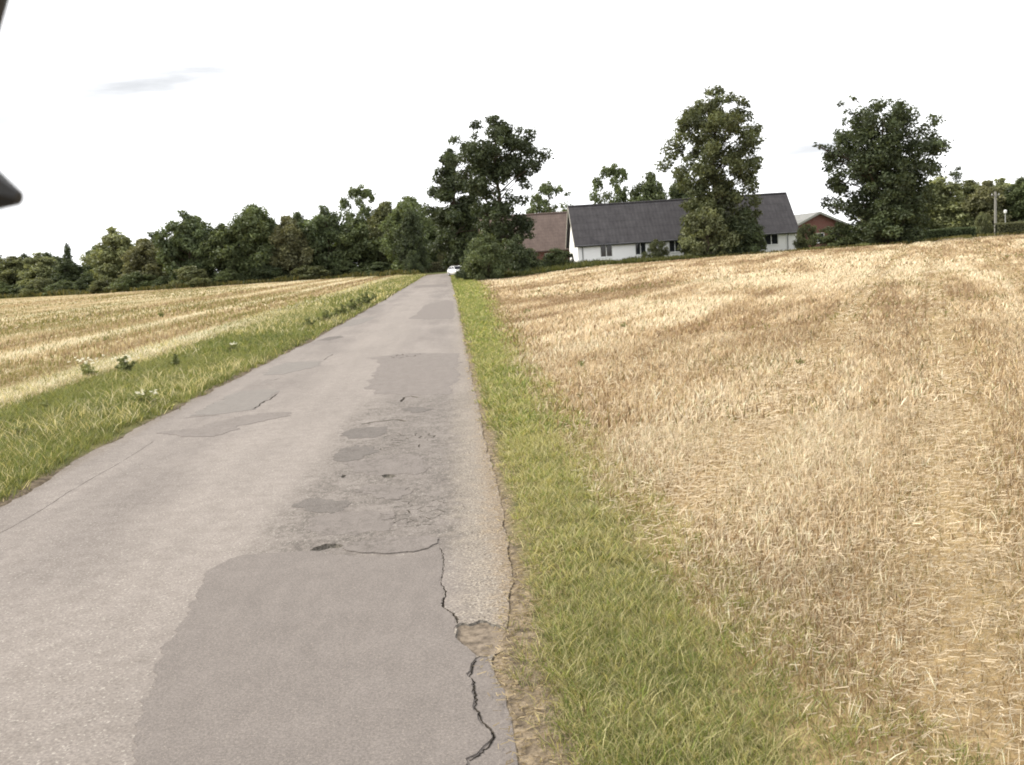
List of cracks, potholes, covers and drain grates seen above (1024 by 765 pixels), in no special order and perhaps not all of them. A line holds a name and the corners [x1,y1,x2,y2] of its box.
crack [440,548,459,624]
pothole [455,620,512,656]
crack [469,661,495,761]
